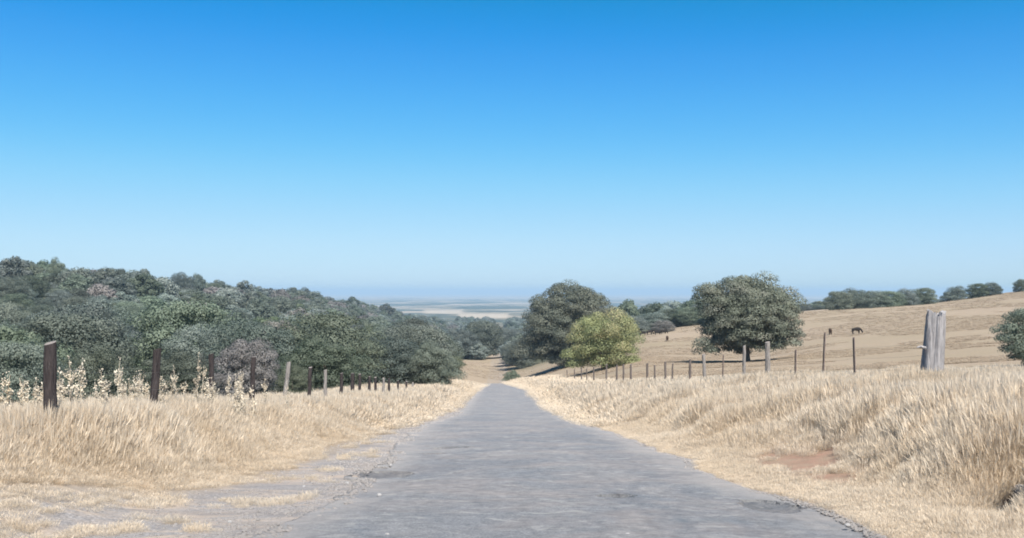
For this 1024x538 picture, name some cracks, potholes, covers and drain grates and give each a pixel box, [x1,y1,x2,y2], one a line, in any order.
pothole [347,471,414,479]
pothole [736,499,807,514]
